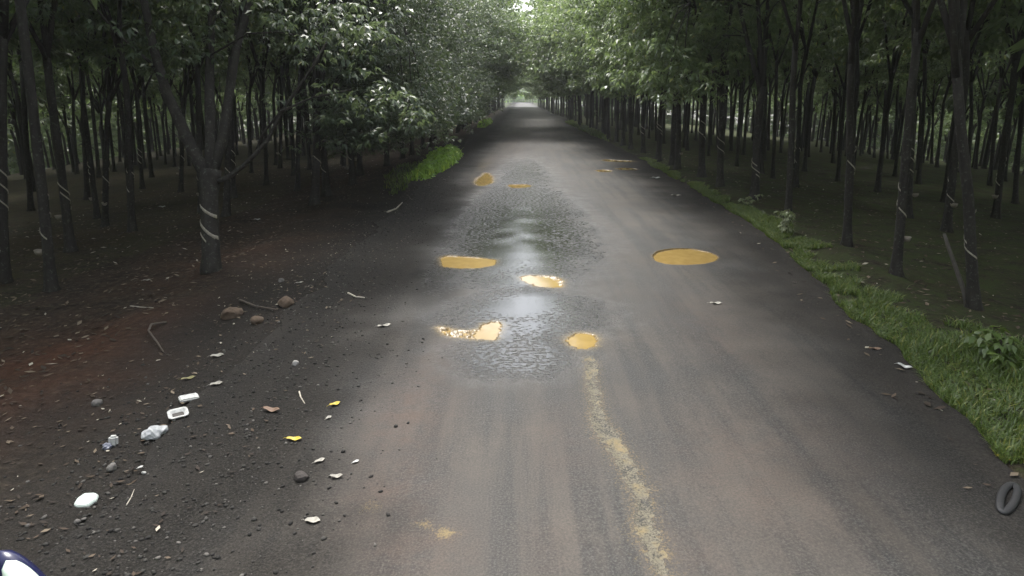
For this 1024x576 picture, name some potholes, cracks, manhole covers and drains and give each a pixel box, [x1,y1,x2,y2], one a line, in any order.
pothole [474,173,494,186]
pothole [565,332,599,349]
pothole [436,321,502,340]
pothole [440,255,497,268]
pothole [519,275,564,288]
pothole [652,248,719,265]
